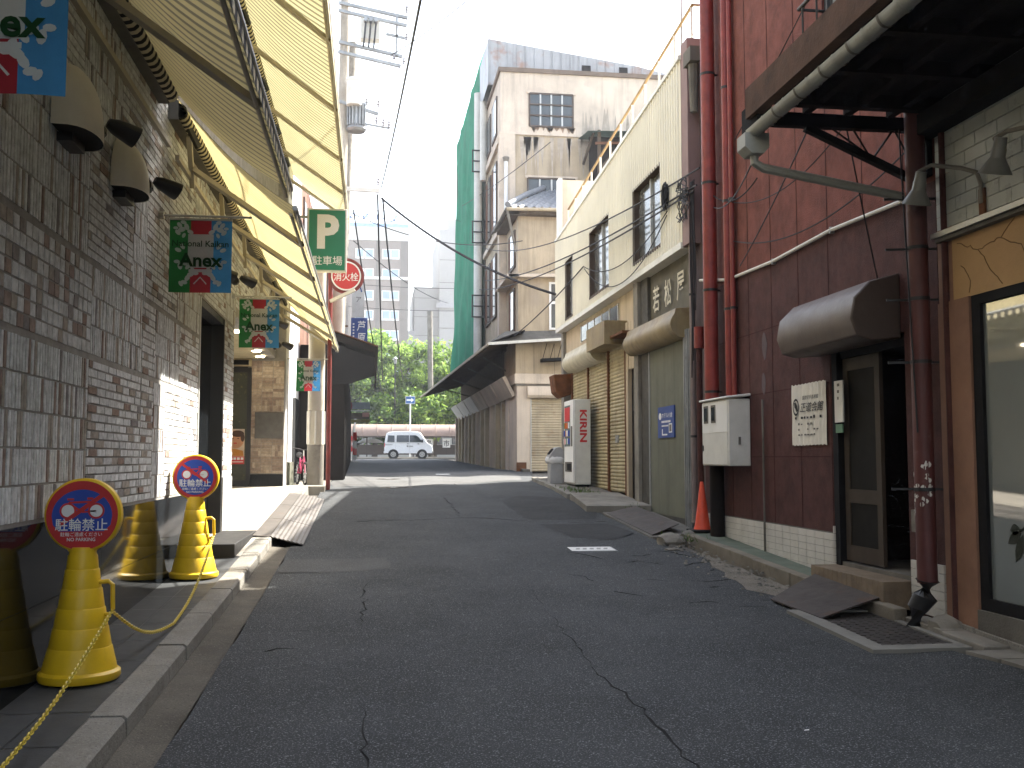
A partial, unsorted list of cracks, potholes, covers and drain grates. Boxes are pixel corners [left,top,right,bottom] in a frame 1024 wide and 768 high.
crack [359,708,369,768]
crack [570,551,770,607]
crack [360,583,368,625]
crack [528,585,700,768]
